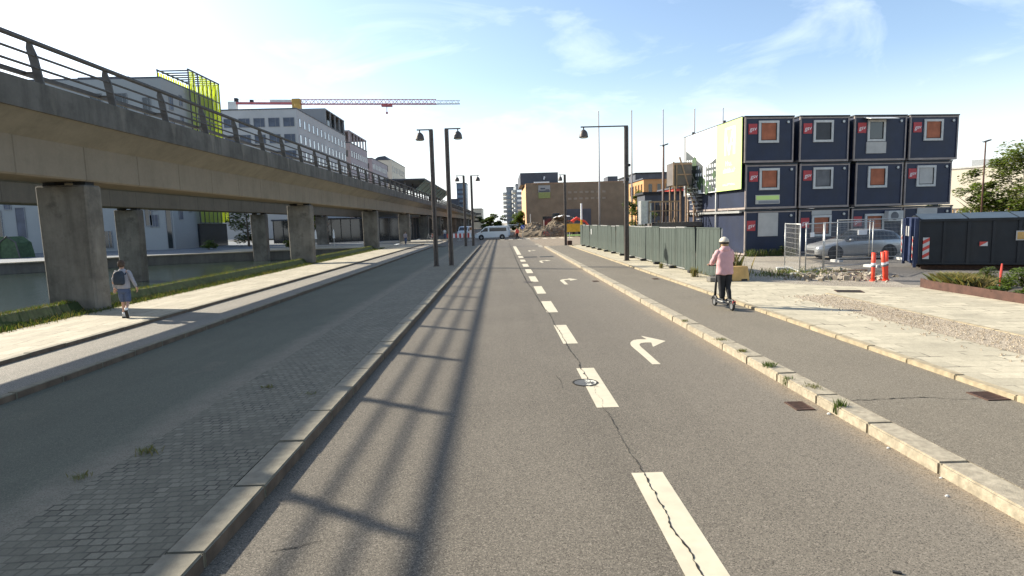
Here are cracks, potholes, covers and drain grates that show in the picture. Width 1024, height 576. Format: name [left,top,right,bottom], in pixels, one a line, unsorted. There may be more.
drain grate [966,391,1011,401]
drain grate [784,401,815,411]
crack [510,246,704,576]
